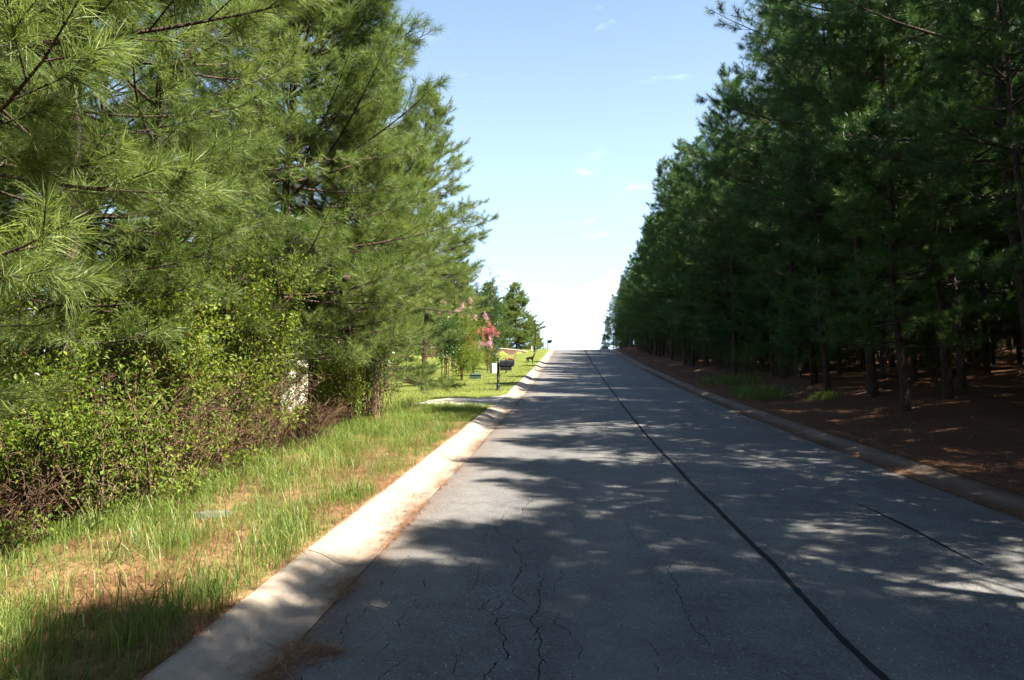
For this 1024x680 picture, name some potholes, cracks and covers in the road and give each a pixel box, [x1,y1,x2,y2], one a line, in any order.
crack [338,499,583,680]
crack [667,564,710,645]
